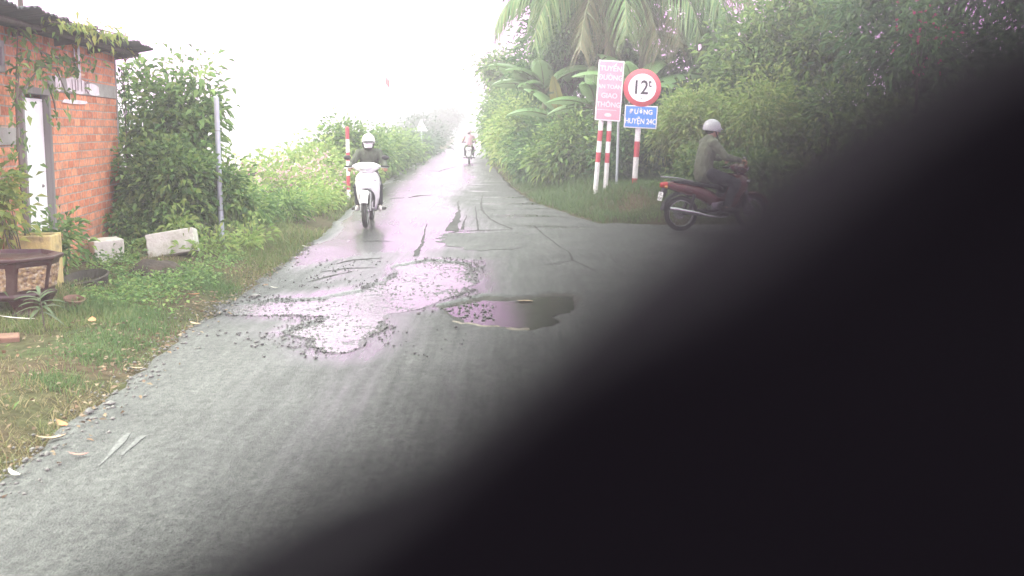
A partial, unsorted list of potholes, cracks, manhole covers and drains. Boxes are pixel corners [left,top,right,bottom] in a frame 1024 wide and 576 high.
crack [391,195,512,233]
crack [413,224,427,256]
pothole [436,296,494,324]
pothole [221,260,479,353]
